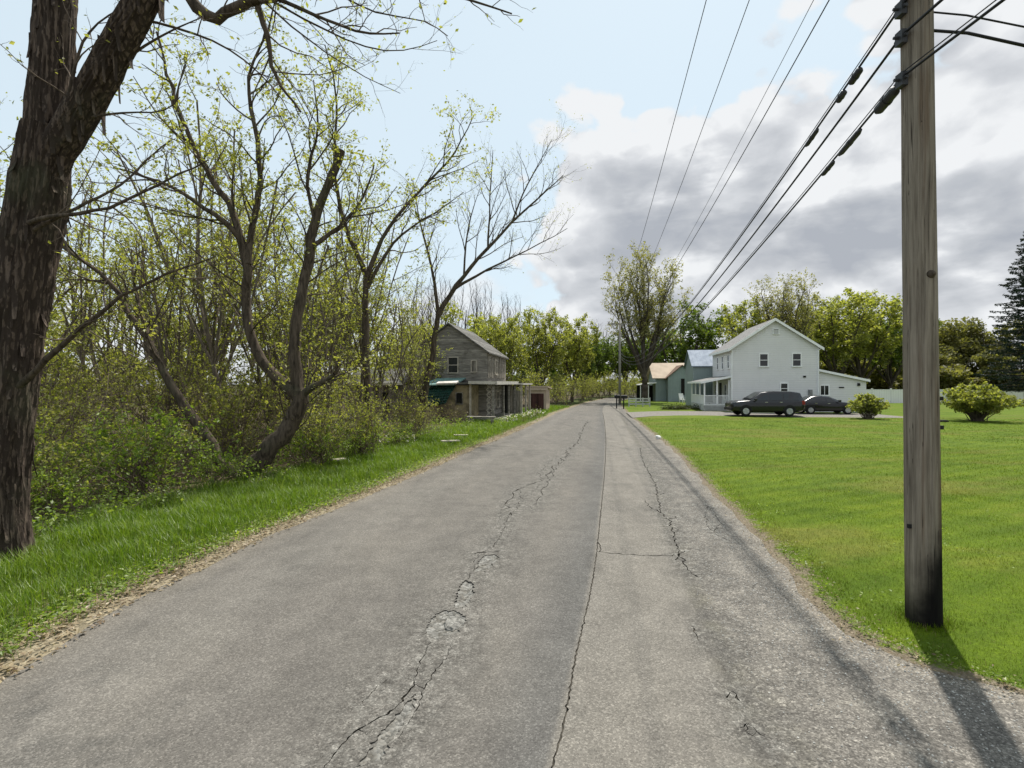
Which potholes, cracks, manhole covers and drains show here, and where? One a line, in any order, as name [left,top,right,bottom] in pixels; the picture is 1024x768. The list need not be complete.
crack [468,421,588,579]
crack [598,448,727,578]
crack [324,642,452,767]
pothole [426,610,467,639]
